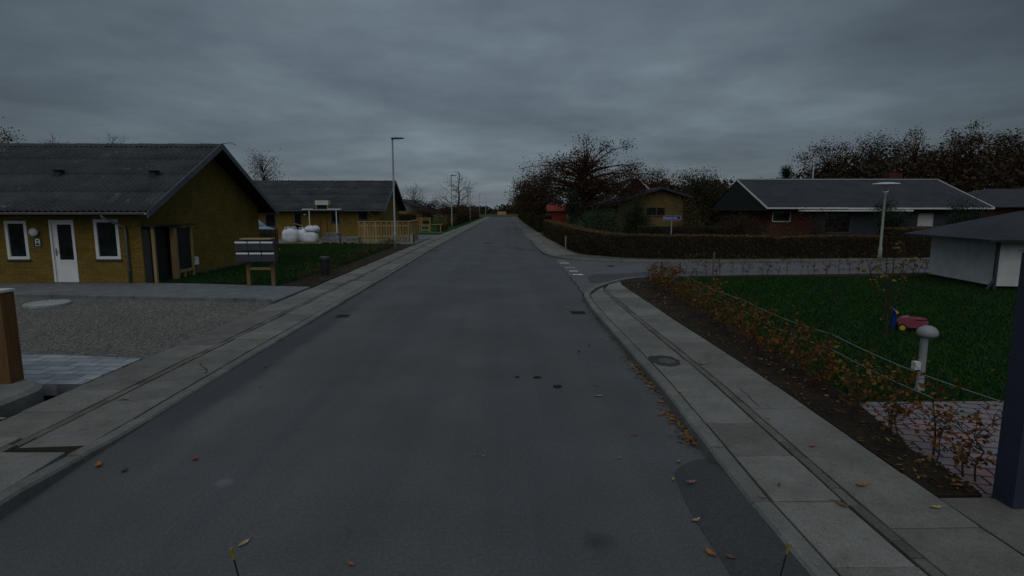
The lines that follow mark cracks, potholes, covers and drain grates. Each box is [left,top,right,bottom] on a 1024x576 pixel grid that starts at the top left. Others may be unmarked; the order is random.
manhole cover [22,300,72,309]
manhole cover [648,355,681,367]
